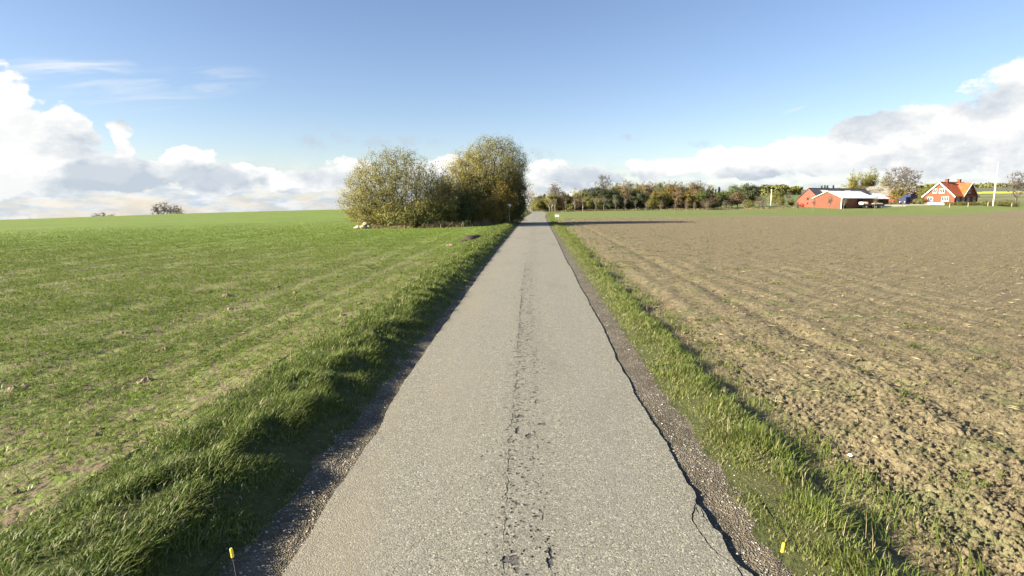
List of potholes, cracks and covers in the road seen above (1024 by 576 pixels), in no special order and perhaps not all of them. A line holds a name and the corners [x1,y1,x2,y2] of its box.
crack [428,262,591,576]
crack [692,502,744,576]
pothole [500,554,521,565]
